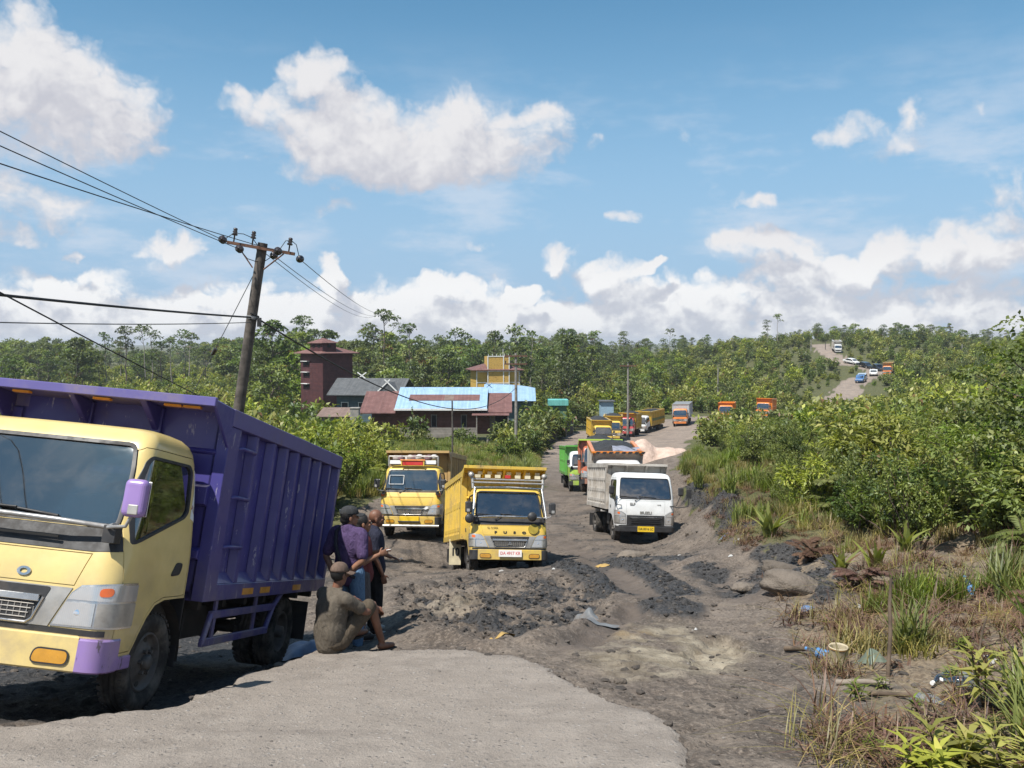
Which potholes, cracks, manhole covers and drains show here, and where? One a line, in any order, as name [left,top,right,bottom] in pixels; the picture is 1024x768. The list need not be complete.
pothole [395,571,621,640]
pothole [680,634,754,671]
